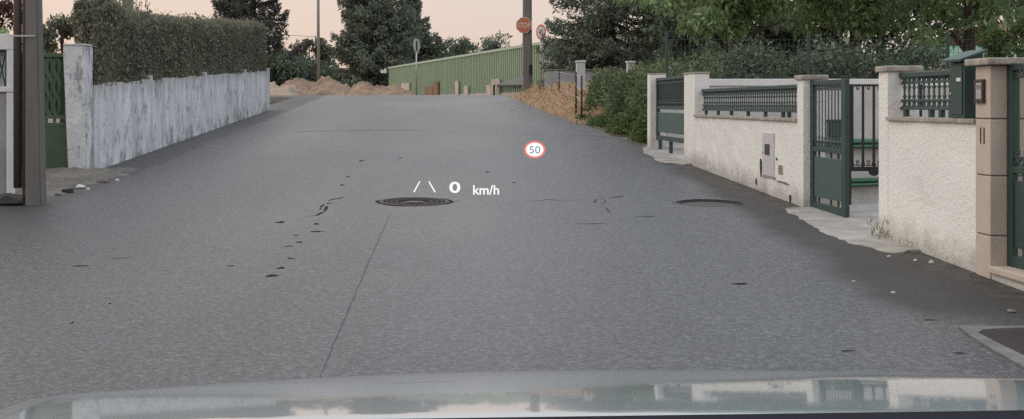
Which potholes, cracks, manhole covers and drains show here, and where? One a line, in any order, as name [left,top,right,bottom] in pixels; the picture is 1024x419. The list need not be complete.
manhole cover [375,197,454,207]
crack [315,197,343,216]
